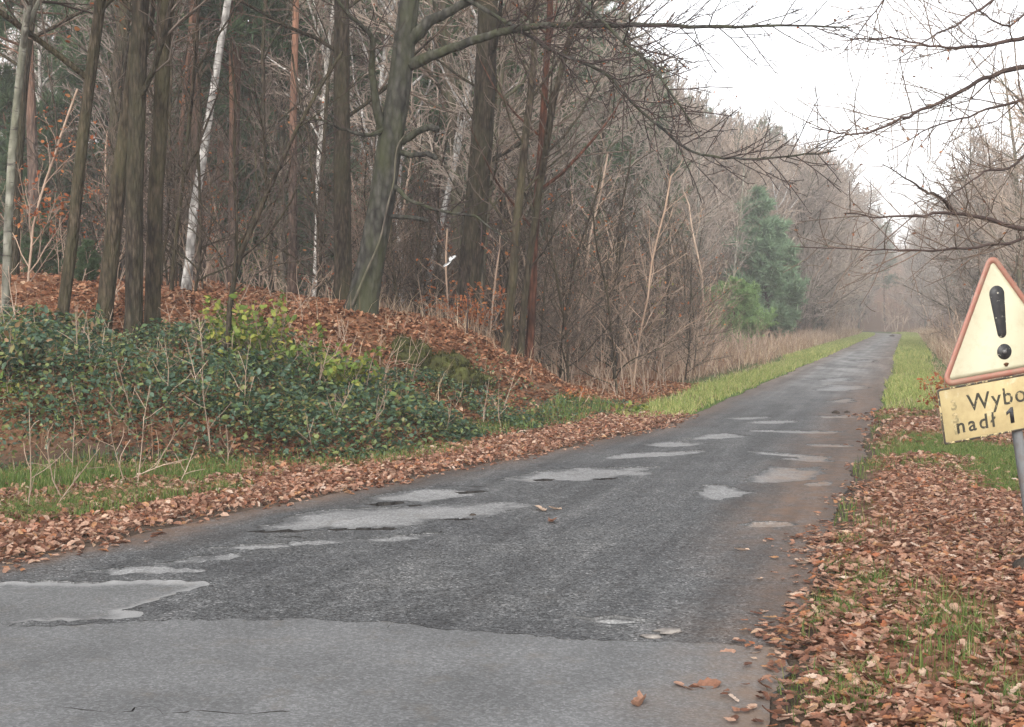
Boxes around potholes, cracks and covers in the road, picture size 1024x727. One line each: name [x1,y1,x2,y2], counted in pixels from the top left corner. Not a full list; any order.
pothole [364,488,486,502]
pothole [259,502,535,531]
